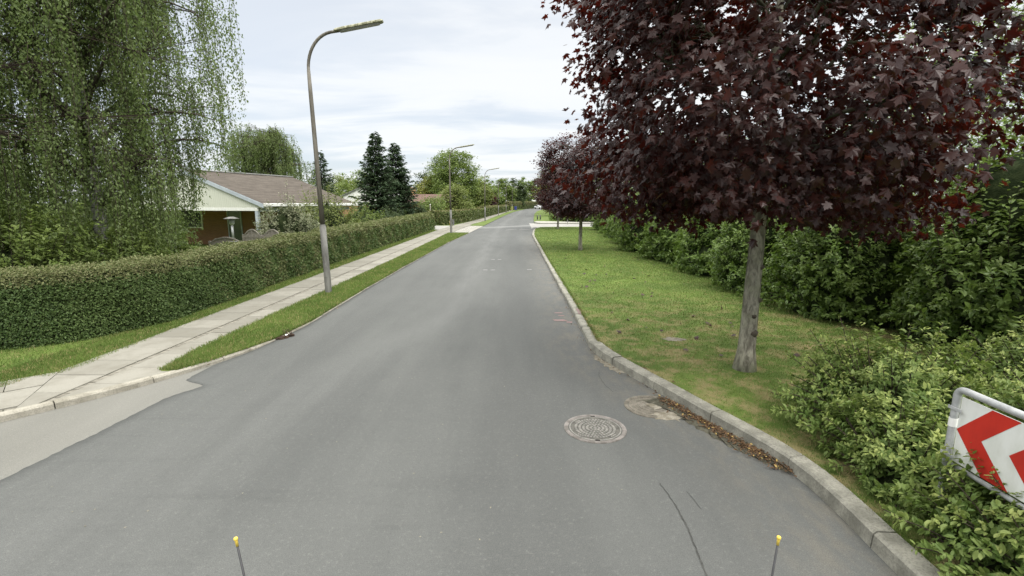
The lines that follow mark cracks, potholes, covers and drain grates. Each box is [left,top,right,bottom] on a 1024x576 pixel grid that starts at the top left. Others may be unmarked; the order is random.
manhole cover [564,414,627,444]
crack [660,483,708,576]
